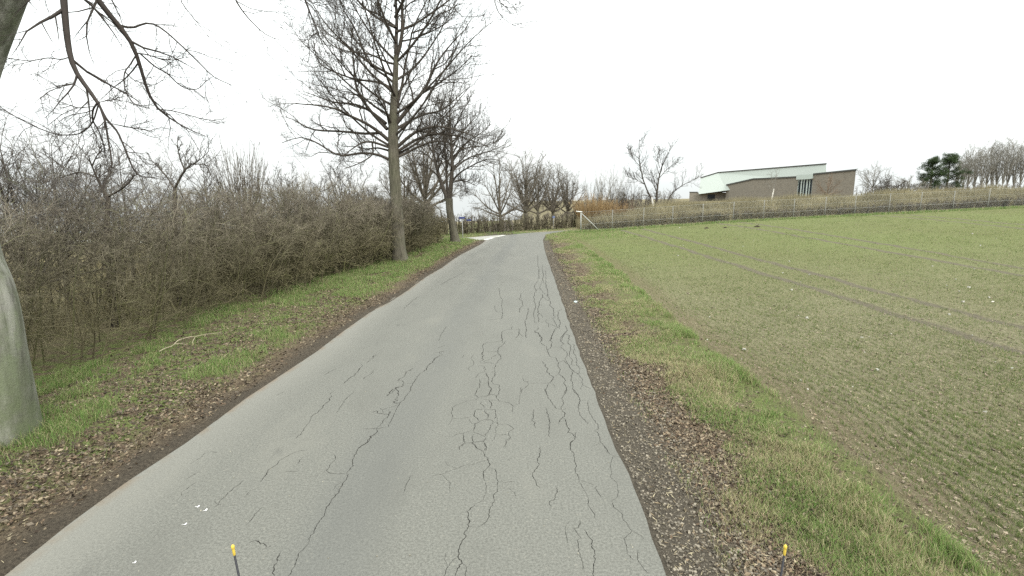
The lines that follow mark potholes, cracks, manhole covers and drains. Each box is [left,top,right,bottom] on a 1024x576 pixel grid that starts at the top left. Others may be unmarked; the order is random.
crack [434,255,648,576]
crack [215,329,445,576]
